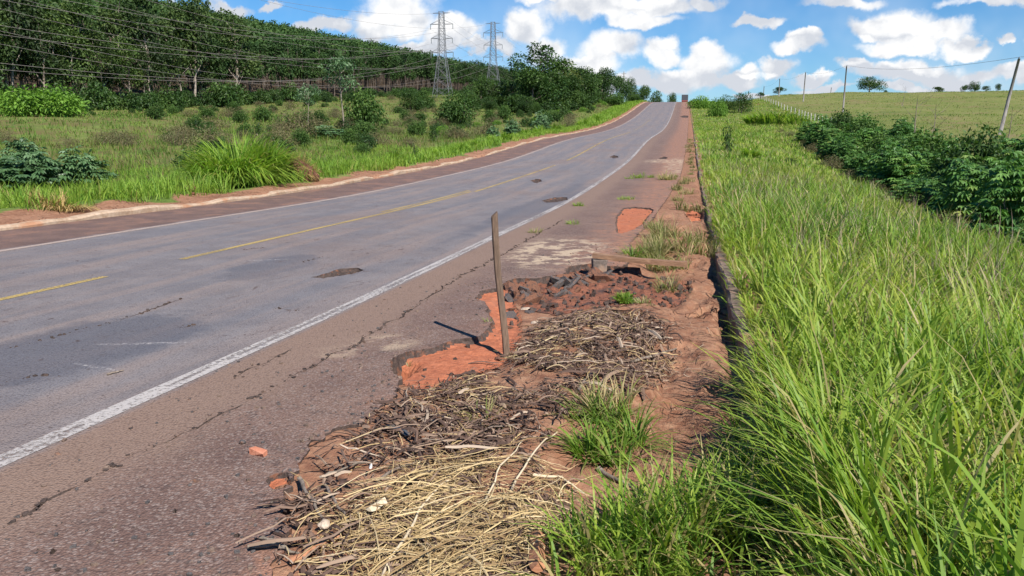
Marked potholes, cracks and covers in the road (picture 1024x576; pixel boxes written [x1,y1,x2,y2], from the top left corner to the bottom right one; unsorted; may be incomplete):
pothole [506,264,693,316]
pothole [615,207,653,233]
crack [3,220,563,528]
pothole [315,268,362,278]
pothole [390,283,522,389]
